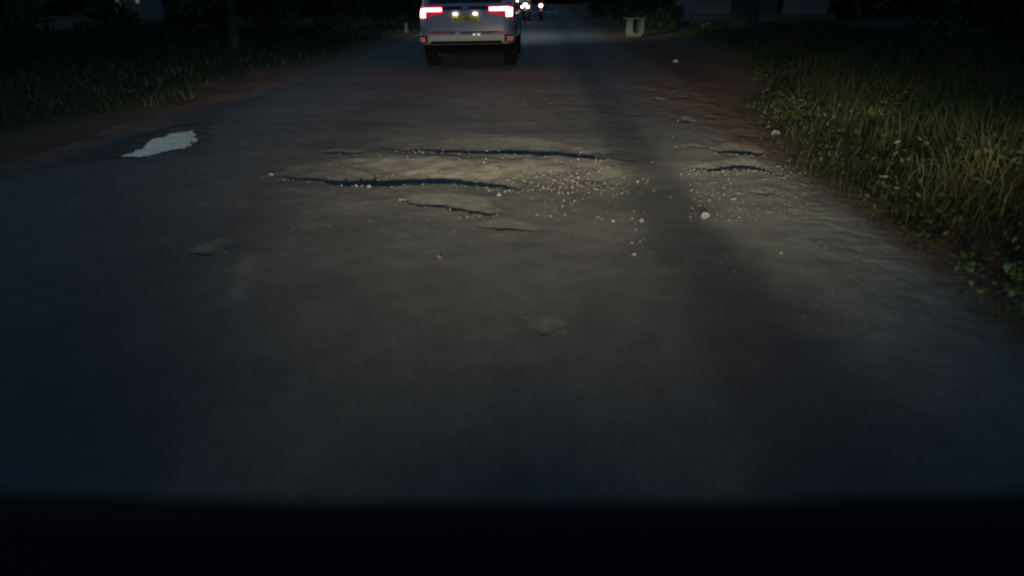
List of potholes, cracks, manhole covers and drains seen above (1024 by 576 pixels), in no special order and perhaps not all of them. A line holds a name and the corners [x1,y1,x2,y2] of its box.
pothole [395,138,610,160]
pothole [708,143,774,157]
pothole [686,157,787,178]
pothole [182,238,236,257]
pothole [401,193,508,216]
pothole [527,316,563,336]
pothole [269,155,523,191]
